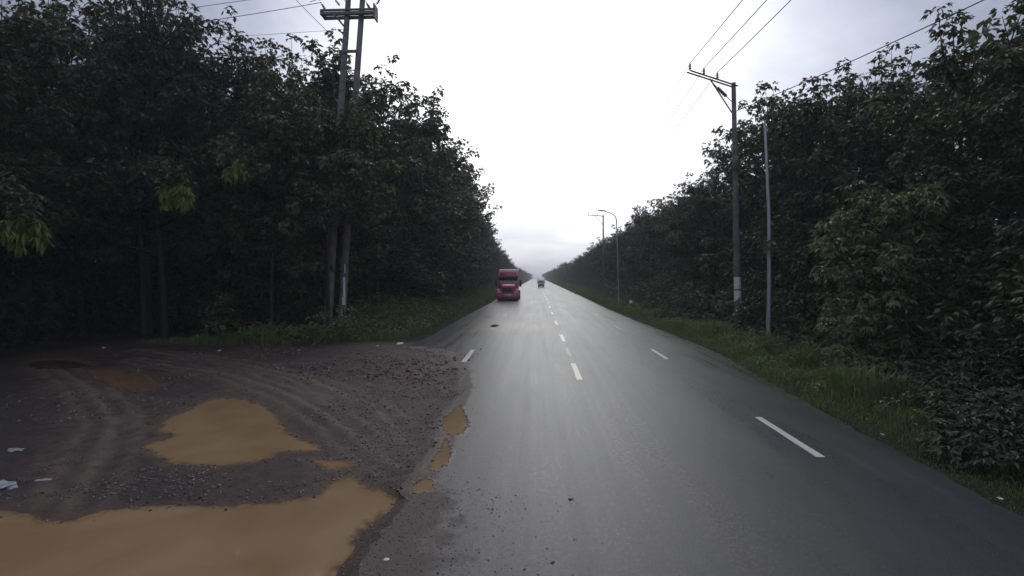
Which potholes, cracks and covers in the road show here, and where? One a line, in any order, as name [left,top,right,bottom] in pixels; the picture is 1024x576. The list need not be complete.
pothole [440,405,471,436]
pothole [411,477,435,494]
pothole [425,438,453,472]
